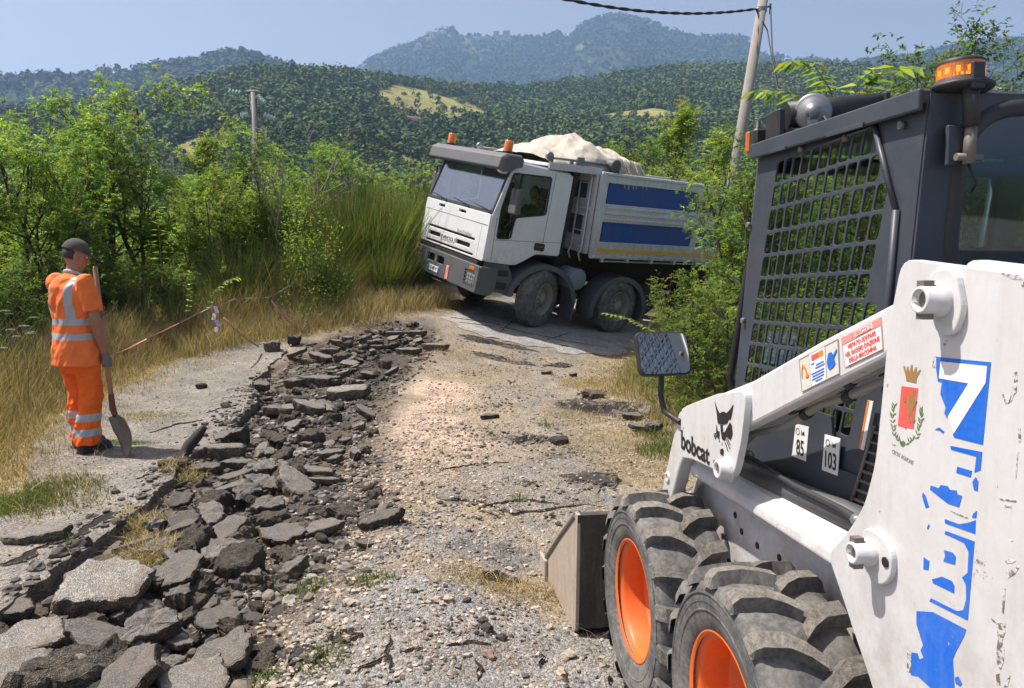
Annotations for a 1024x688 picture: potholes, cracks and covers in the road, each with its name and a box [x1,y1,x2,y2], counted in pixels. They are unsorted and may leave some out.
crack [149,405,234,433]
crack [355,635,425,673]
crack [0,511,121,567]
